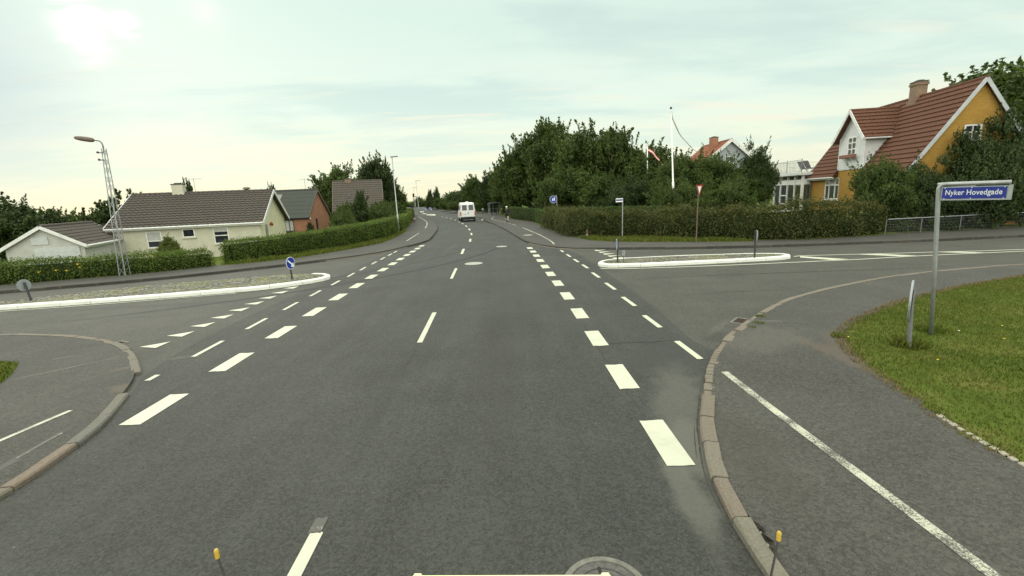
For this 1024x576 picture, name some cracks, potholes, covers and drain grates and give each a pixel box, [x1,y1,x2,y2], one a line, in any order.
manhole cover [565,556,642,576]
